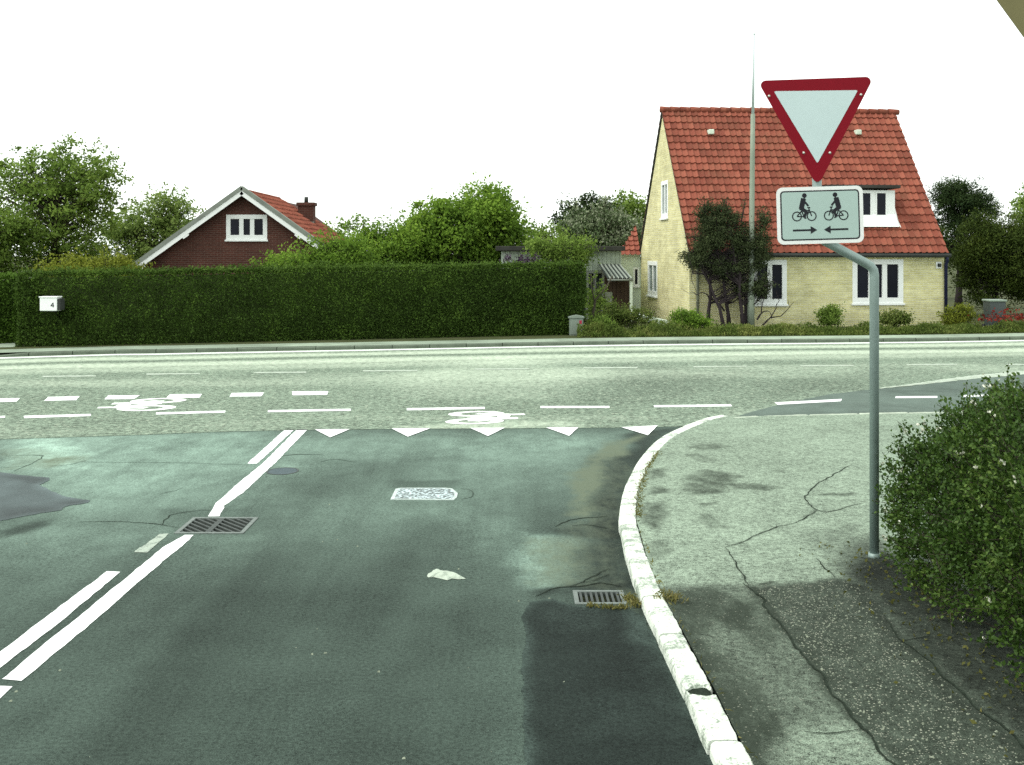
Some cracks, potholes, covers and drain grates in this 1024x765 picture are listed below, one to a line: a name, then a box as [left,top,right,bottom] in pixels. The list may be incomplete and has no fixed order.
drain grate [573,590,627,605]
manhole cover [266,467,299,475]
crack [90,510,197,528]
manhole cover [390,488,458,500]
drain grate [174,517,259,534]
crack [725,465,862,585]
crack [537,568,622,596]
